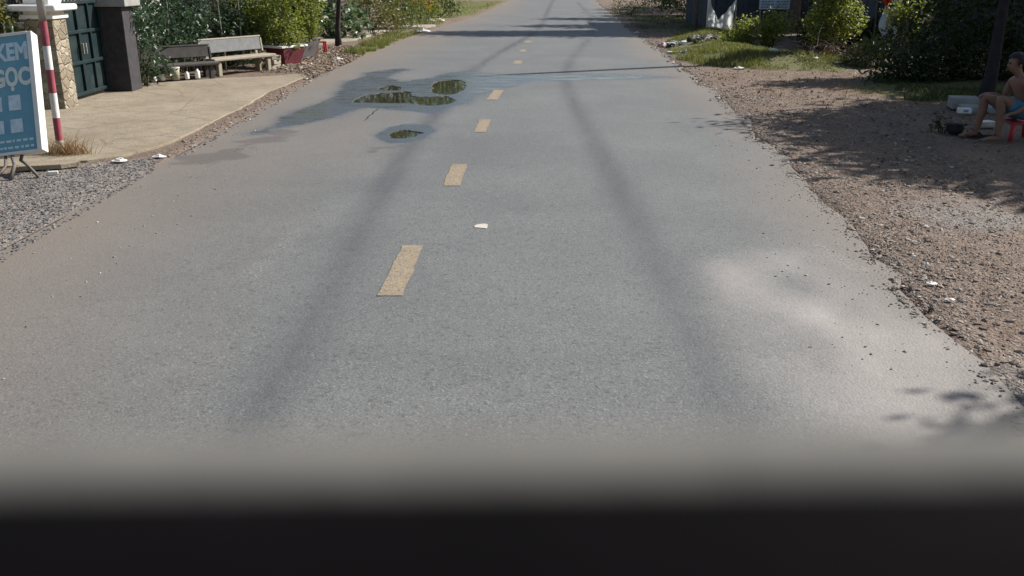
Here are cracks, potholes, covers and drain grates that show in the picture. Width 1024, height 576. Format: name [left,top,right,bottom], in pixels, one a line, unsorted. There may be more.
pothole [353,91,456,106]
pothole [388,130,424,138]
pothole [429,80,466,95]
